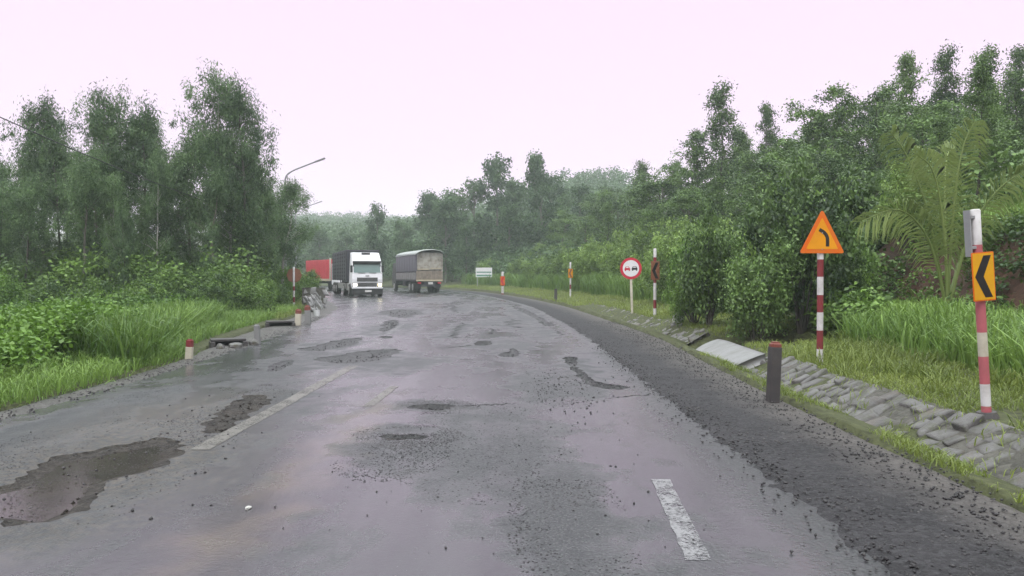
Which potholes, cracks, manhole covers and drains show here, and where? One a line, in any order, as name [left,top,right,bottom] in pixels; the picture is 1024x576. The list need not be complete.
pothole [498,348,521,357]
pothole [200,395,272,433]
pothole [267,360,294,372]
pothole [0,437,186,527]
pothole [379,320,400,332]
pothole [313,349,404,364]
pothole [562,357,630,390]
pothole [297,338,362,351]
